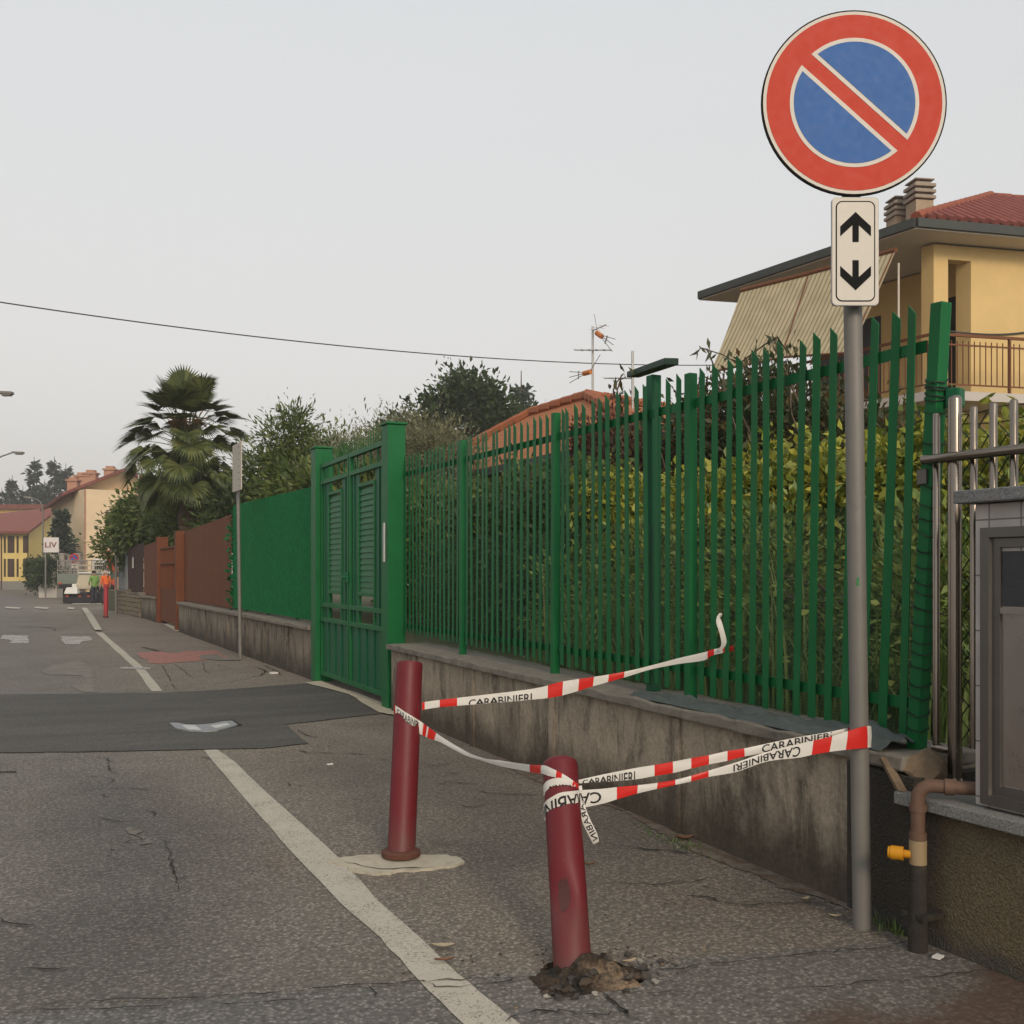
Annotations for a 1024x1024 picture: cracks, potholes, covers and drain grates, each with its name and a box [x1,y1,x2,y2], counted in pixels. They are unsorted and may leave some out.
crack [645,941,907,971]
crack [93,756,156,861]
crack [162,838,183,890]
pothole [539,961,643,993]
crack [141,647,241,689]
